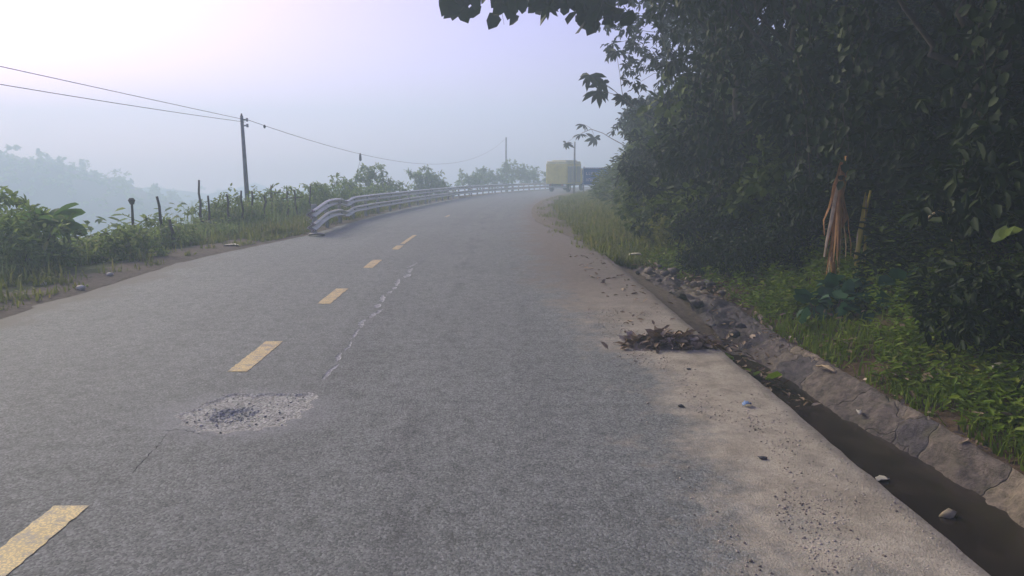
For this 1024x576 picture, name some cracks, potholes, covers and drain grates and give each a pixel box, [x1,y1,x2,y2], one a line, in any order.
pothole [174,392,319,434]
crack [133,429,215,472]
